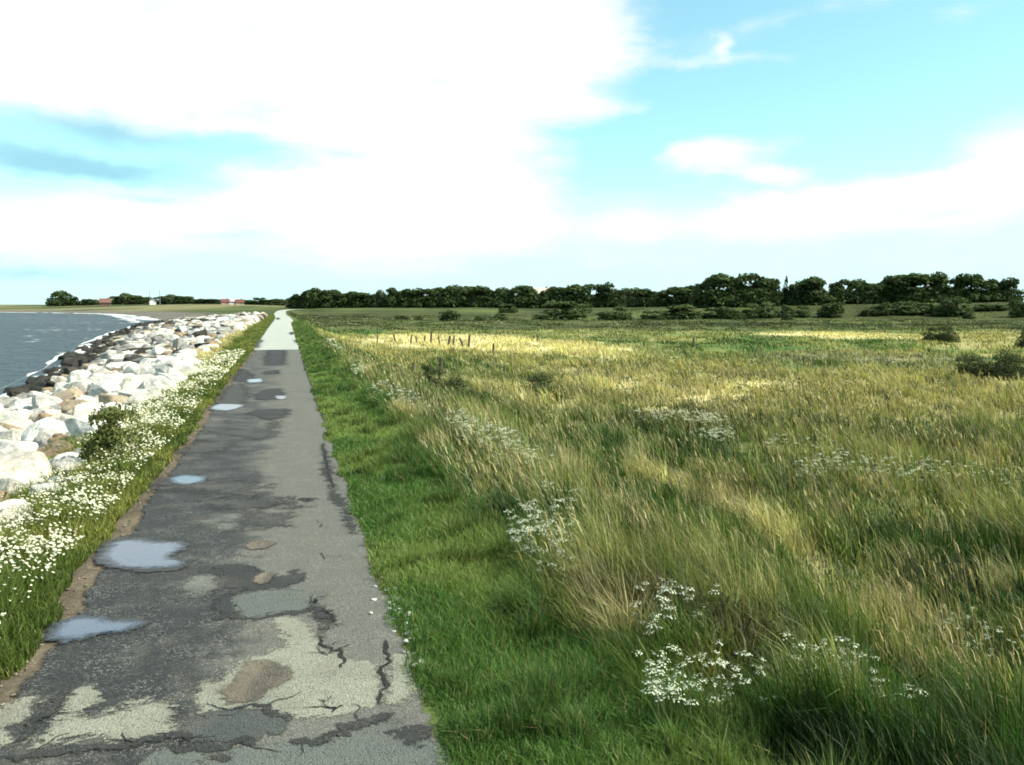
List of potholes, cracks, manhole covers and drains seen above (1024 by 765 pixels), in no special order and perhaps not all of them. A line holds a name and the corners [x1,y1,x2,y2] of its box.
pothole [92,536,193,573]
pothole [41,615,153,644]
pothole [169,475,208,485]
crack [308,594,349,667]
crack [5,639,395,765]
